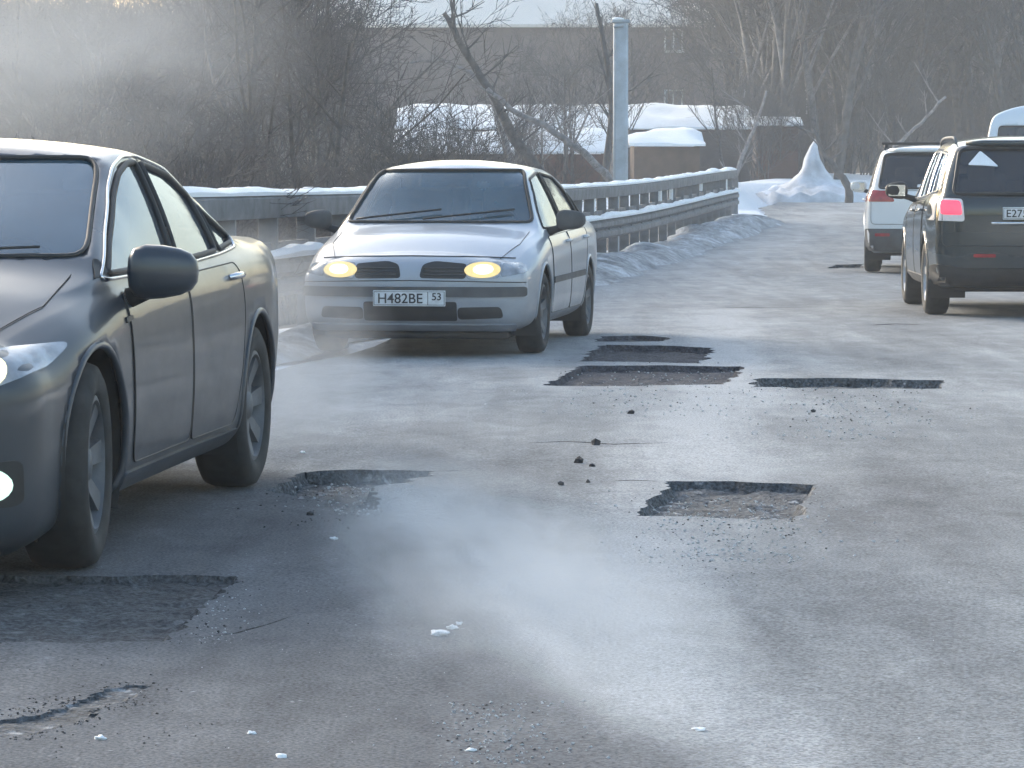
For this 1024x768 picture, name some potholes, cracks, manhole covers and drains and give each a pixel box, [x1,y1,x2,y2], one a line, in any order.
pothole [637,481,816,520]
pothole [265,469,435,513]
pothole [0,575,239,643]
pothole [580,345,715,363]
crack [167,617,288,640]
pothole [543,365,745,386]
pothole [748,378,945,389]
